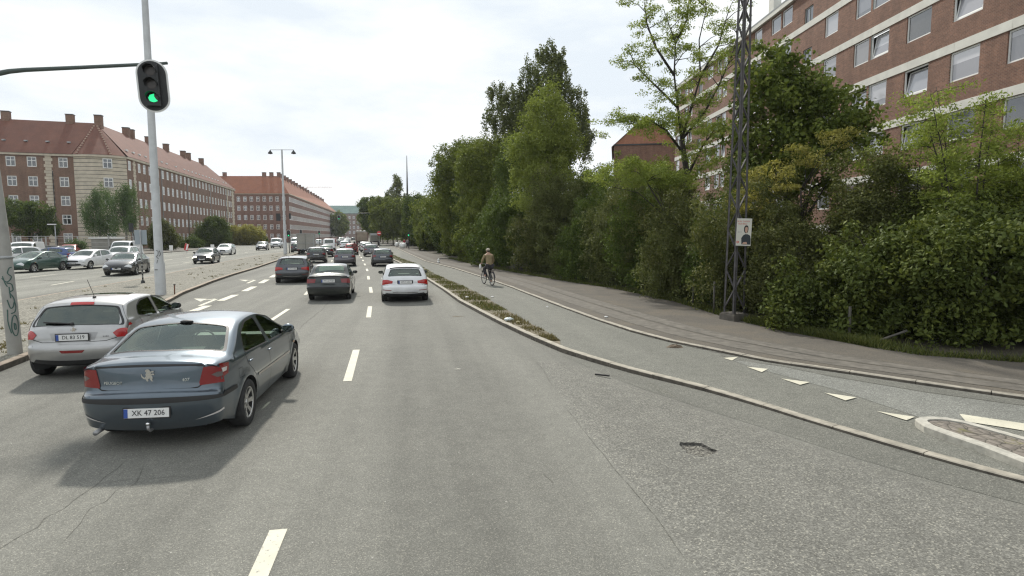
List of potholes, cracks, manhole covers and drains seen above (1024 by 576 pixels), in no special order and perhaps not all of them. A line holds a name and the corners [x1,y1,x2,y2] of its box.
crack [4,458,178,546]
pothole [679,442,717,457]
